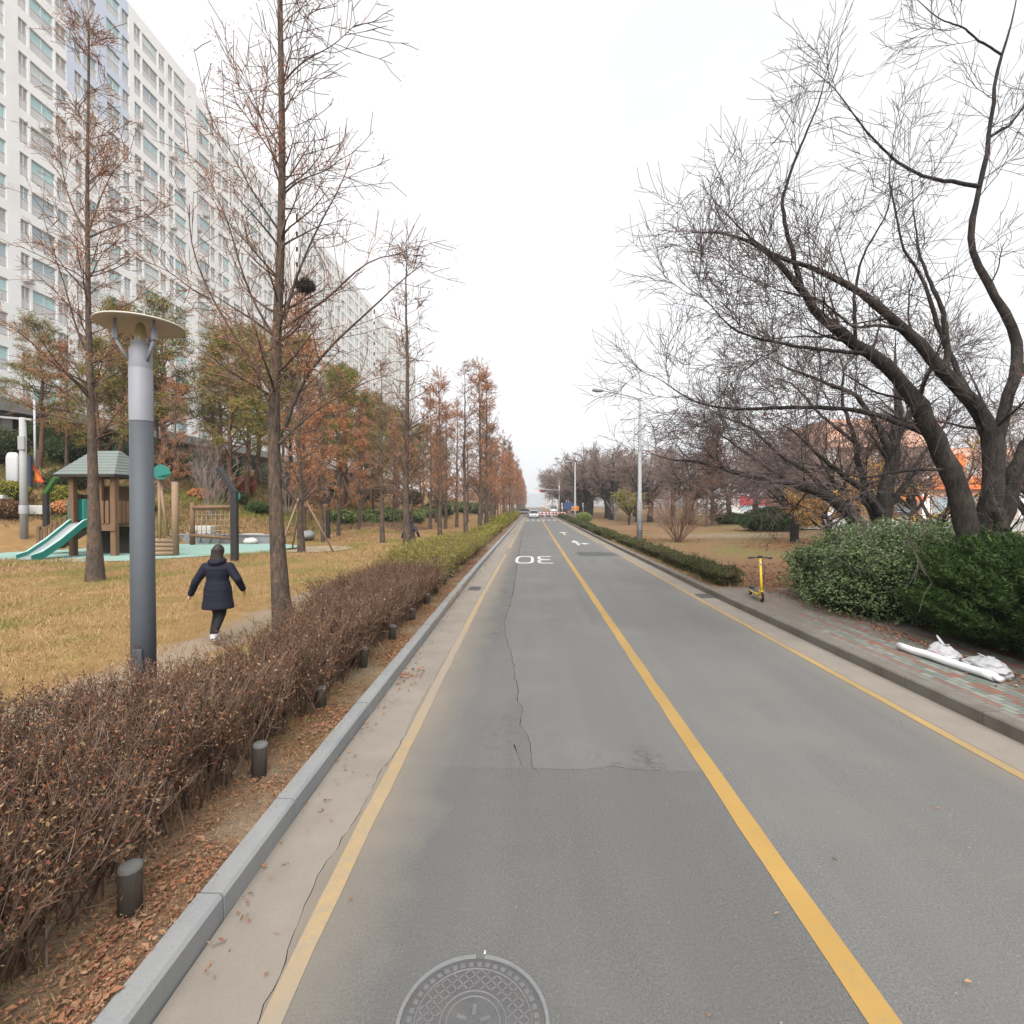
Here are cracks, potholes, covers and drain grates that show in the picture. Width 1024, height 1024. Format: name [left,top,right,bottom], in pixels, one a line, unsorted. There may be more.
crack [257,567,497,1024]
crack [495,527,692,772]
manhole cover [395,950,550,1024]
